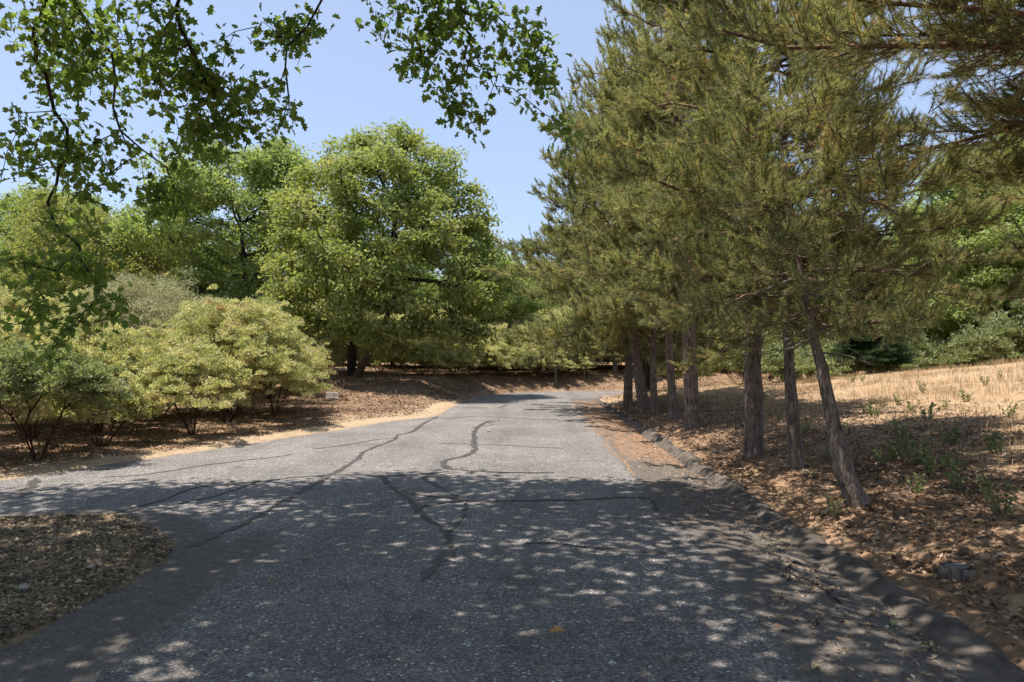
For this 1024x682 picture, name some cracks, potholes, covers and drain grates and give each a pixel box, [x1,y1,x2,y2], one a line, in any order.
crack [109,454,291,477]
